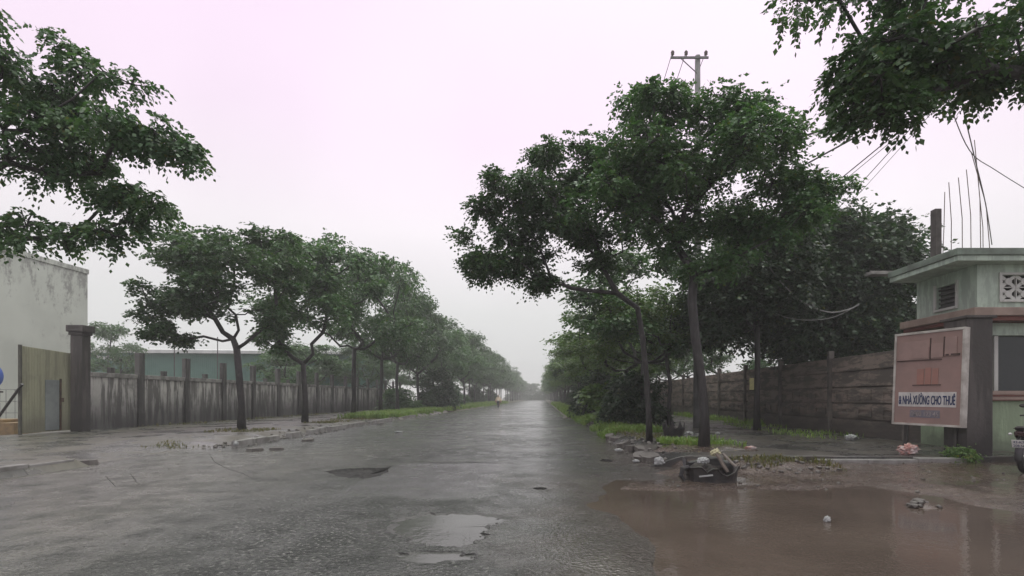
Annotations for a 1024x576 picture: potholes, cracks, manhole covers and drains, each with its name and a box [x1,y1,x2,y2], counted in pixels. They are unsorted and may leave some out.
pothole [324,466,392,479]
pothole [390,550,478,563]
pothole [387,512,513,547]
